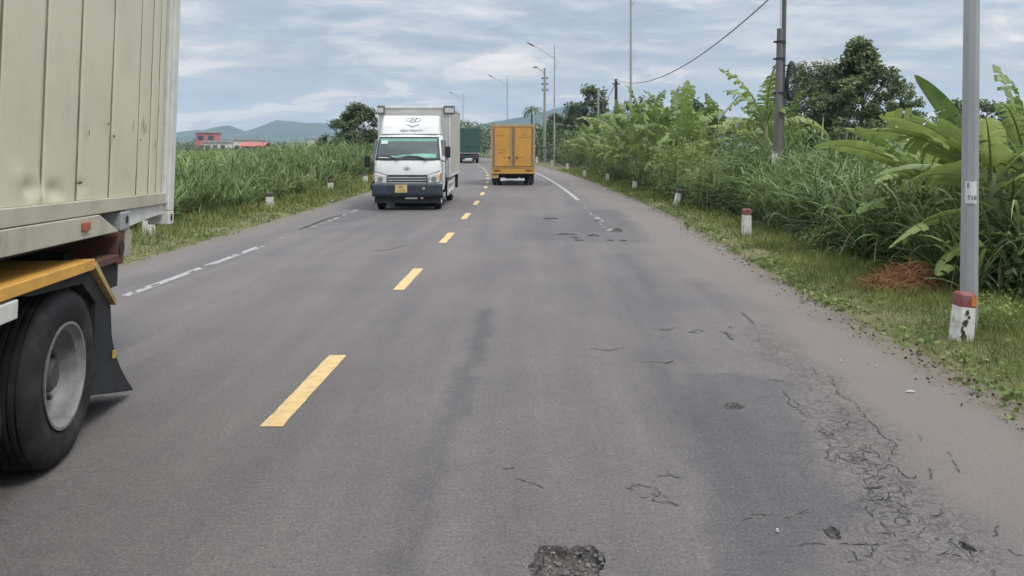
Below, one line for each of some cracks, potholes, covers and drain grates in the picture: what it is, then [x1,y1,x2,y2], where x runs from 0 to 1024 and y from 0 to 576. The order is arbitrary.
pothole [515,537,619,576]
crack [502,467,544,489]
pothole [823,527,842,540]
crack [769,367,960,562]
crack [300,214,345,230]
crack [626,471,685,506]
